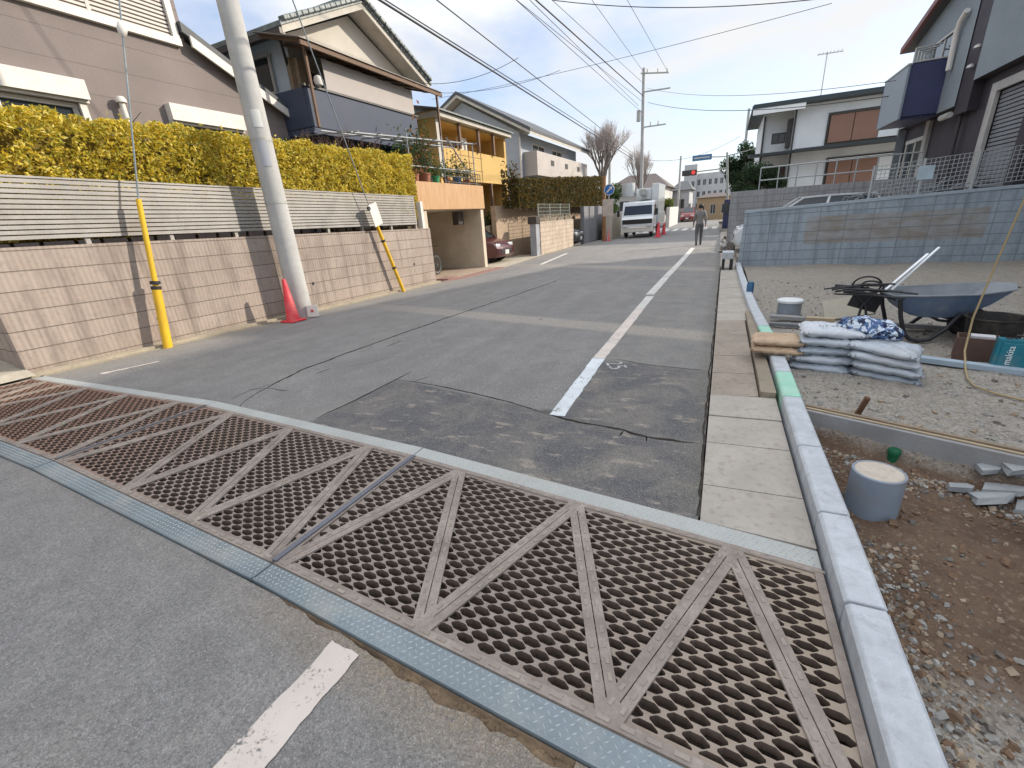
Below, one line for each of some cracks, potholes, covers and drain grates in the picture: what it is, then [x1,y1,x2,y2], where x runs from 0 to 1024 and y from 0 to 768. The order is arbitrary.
crack [232,272,720,518]
drain grate [0,381,217,471]
drain grate [32,401,423,583]
drain grate [252,448,876,768]
drain grate [0,376,75,400]
